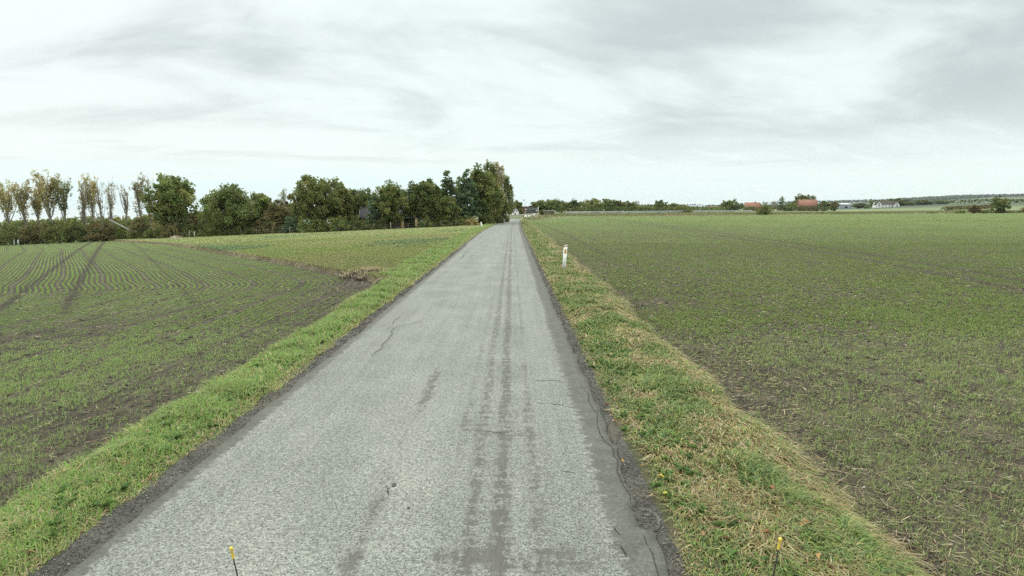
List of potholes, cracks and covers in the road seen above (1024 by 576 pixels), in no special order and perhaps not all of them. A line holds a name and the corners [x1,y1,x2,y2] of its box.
crack [373,316,420,355]
crack [551,387,639,504]
